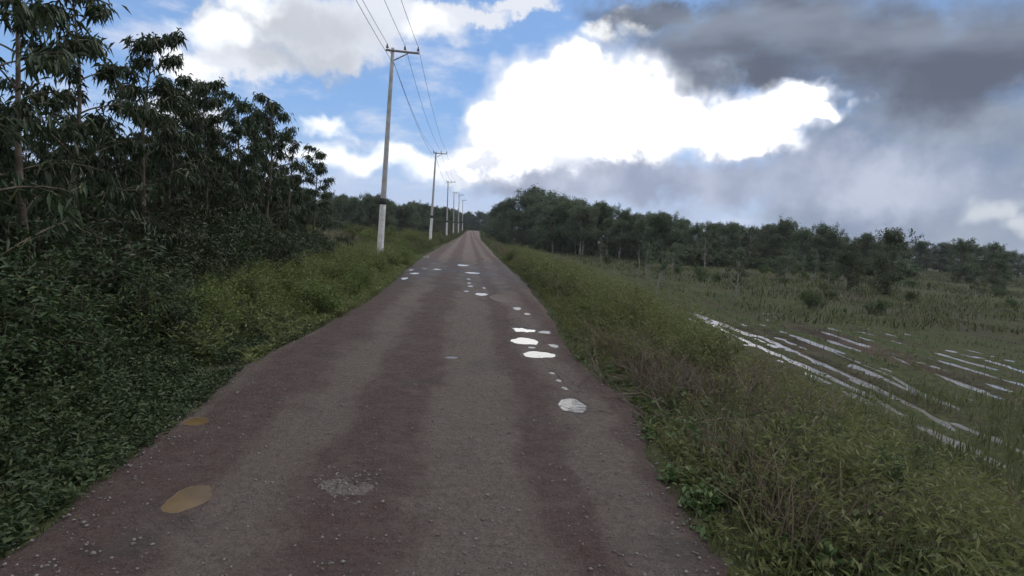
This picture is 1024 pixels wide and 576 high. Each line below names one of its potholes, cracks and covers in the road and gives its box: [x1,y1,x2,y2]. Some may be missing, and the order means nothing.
pothole [555,396,590,414]
pothole [520,350,561,358]
pothole [316,473,381,498]
pothole [507,337,542,345]
